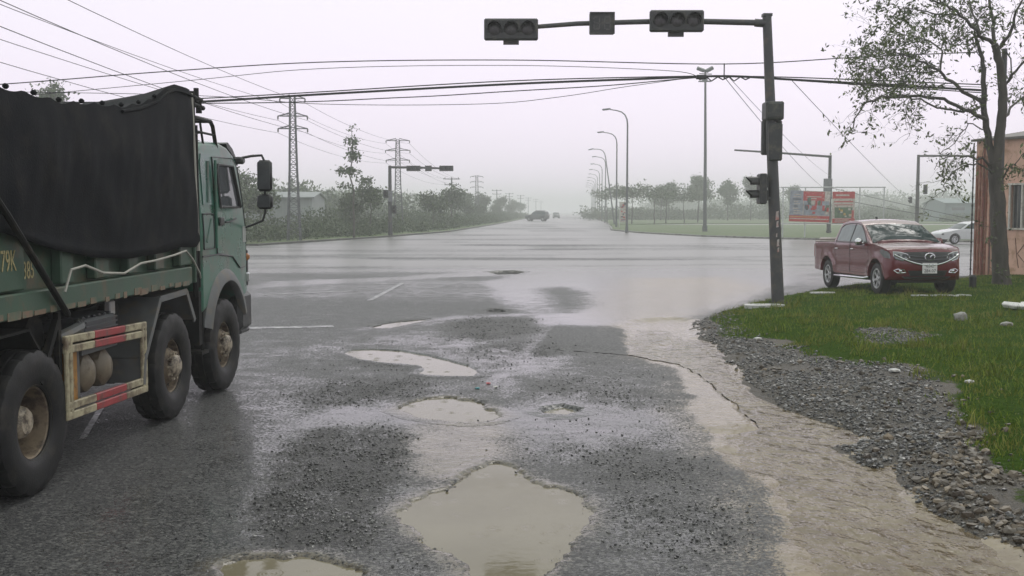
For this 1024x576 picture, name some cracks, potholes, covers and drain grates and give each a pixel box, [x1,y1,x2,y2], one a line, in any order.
pothole [328,347,495,378]
pothole [379,393,522,427]
pothole [522,401,599,420]
crack [555,349,758,426]
pothole [185,545,390,576]
pothole [371,457,619,576]
